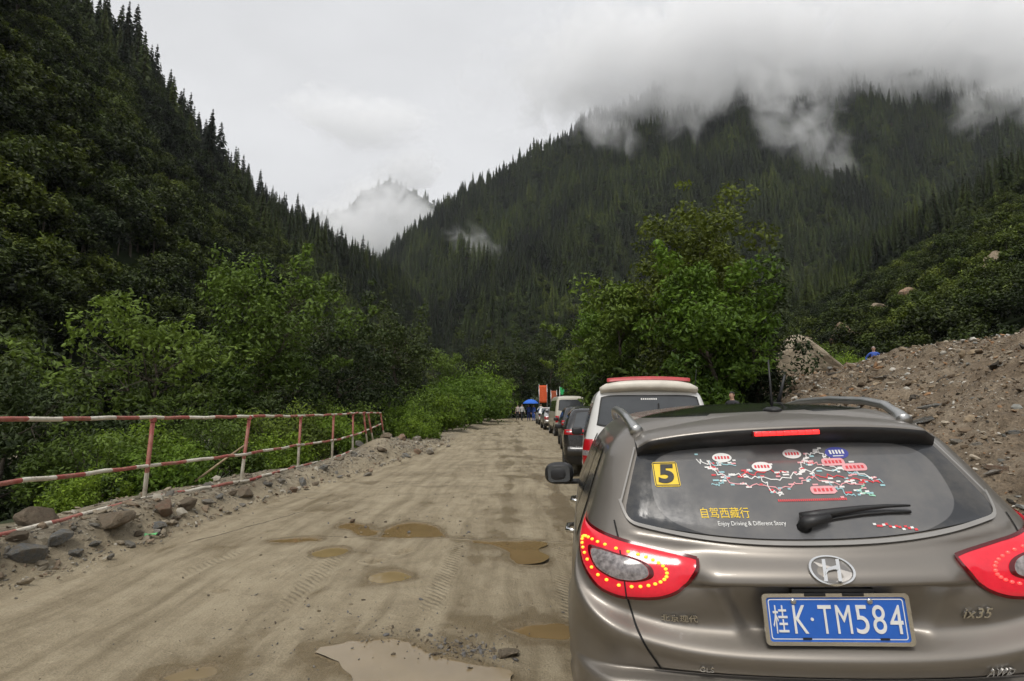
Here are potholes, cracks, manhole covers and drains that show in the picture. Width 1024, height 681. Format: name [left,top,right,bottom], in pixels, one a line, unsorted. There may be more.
pothole [496,621,570,642]
pothole [312,636,517,681]
pothole [306,545,353,559]
pothole [335,522,385,537]
pothole [465,539,551,566]
pothole [377,521,450,539]
pothole [363,568,417,585]
